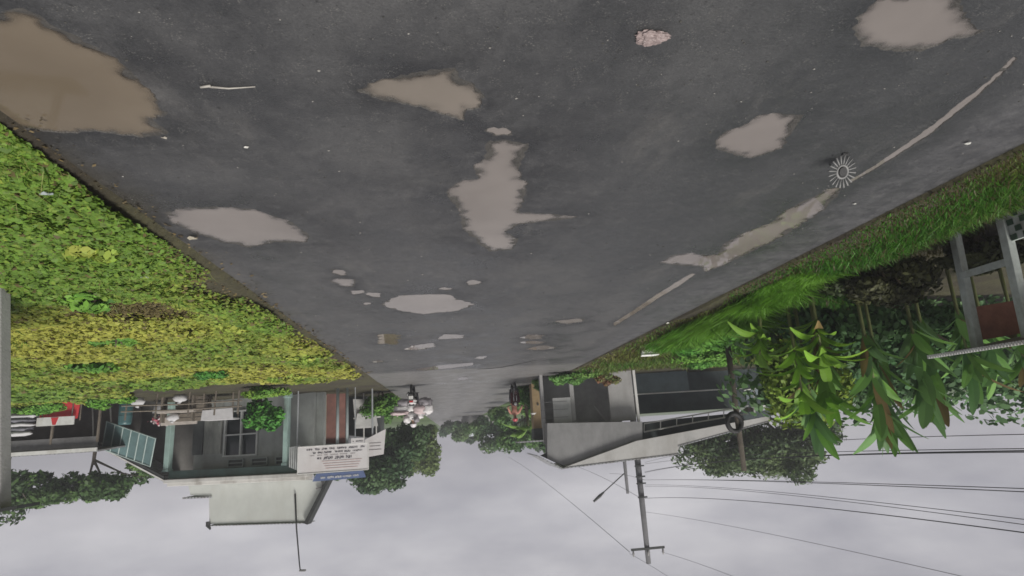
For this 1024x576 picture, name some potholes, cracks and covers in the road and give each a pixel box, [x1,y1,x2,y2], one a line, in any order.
pothole [381,294,475,314]
pothole [447,140,577,251]
pothole [165,206,310,247]
pothole [715,113,803,158]
pothole [0,8,168,138]
pothole [357,68,485,121]
pothole [852,0,985,52]
pothole [660,187,841,272]
